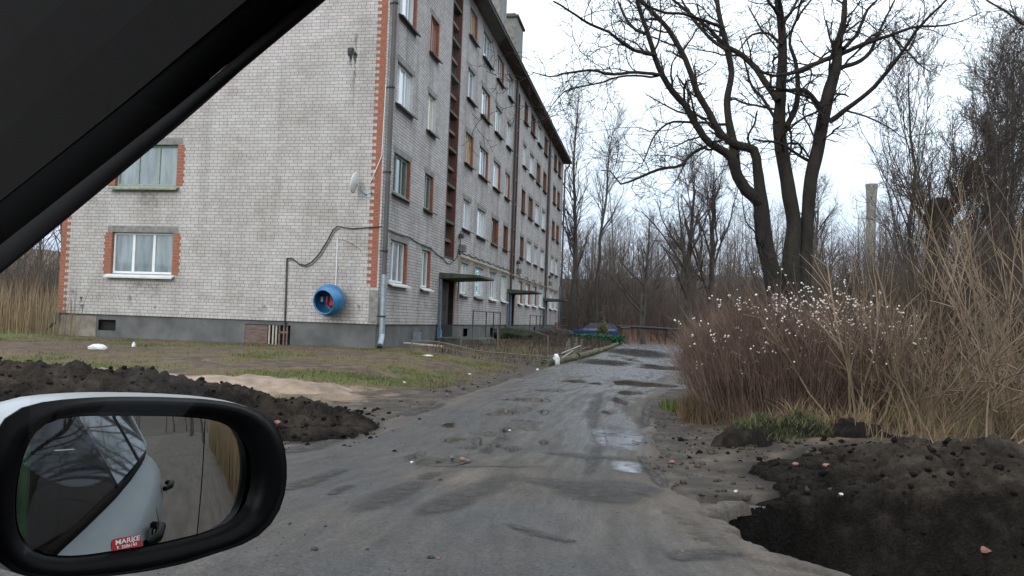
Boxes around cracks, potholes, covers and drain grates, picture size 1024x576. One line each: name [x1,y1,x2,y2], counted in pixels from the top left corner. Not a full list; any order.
pothole [503,406,534,416]
pothole [481,408,523,417]
pothole [447,454,472,464]
pothole [404,450,426,462]
pothole [412,456,448,466]
pothole [602,379,691,389]
